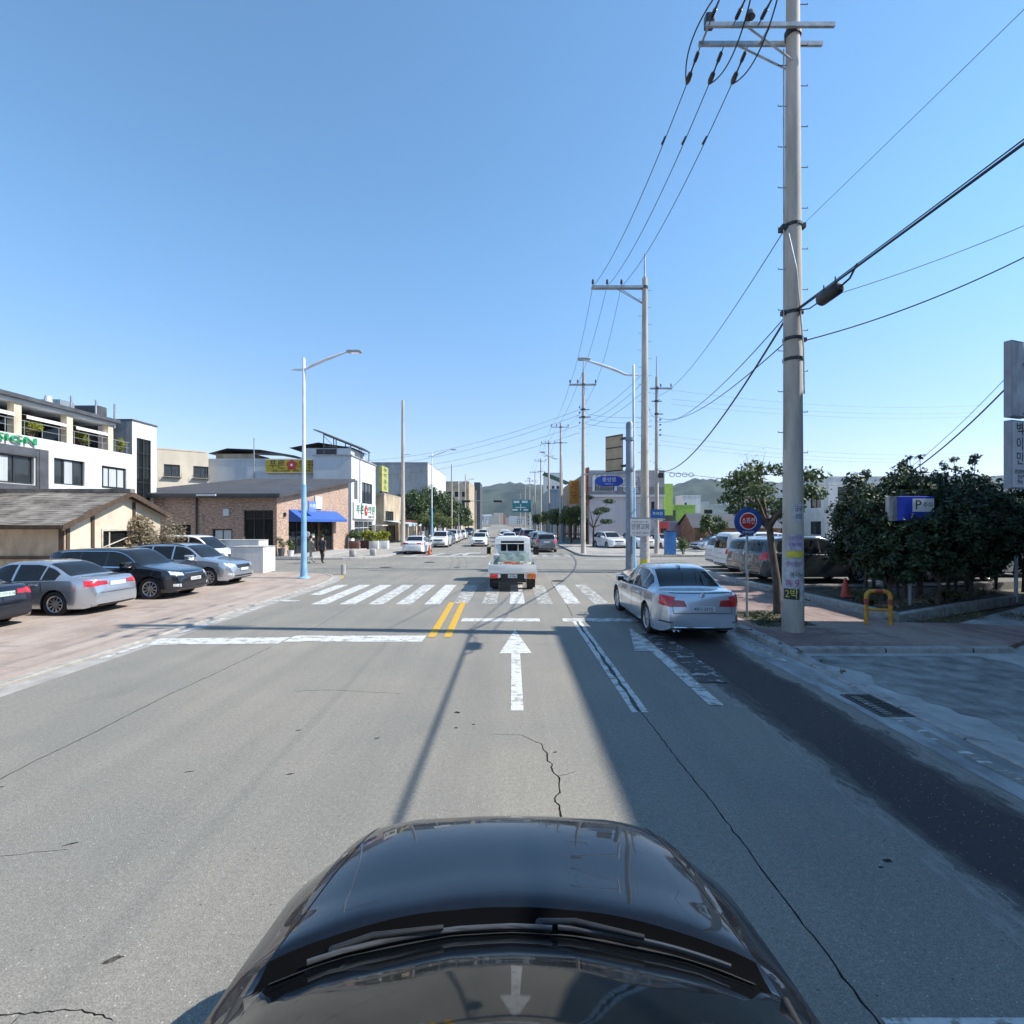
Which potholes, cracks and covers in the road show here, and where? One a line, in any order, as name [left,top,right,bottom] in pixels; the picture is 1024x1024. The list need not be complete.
crack [505,734,576,817]
drain grate [840,694,915,717]
crack [0,1009,113,1024]
